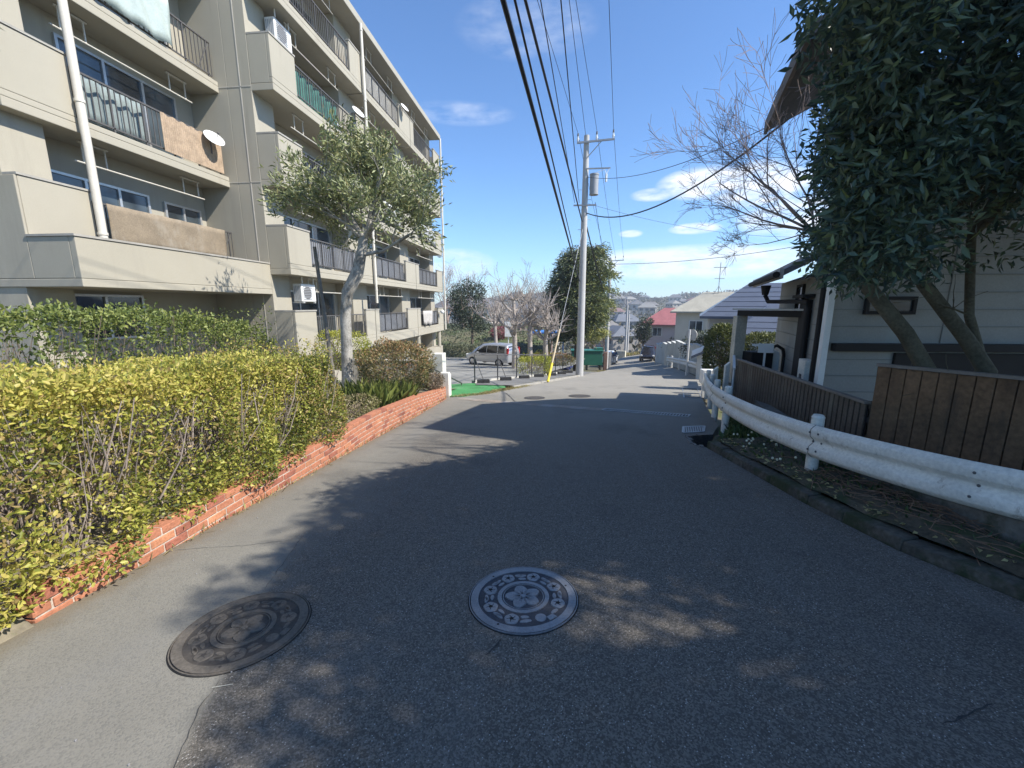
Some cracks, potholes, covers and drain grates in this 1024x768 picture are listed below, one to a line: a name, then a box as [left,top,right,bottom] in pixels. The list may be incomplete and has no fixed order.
drain grate [682,425,706,433]
manhole cover [468,567,579,636]
drain grate [602,408,691,417]
manhole cover [166,592,312,678]
crack [941,704,993,725]
